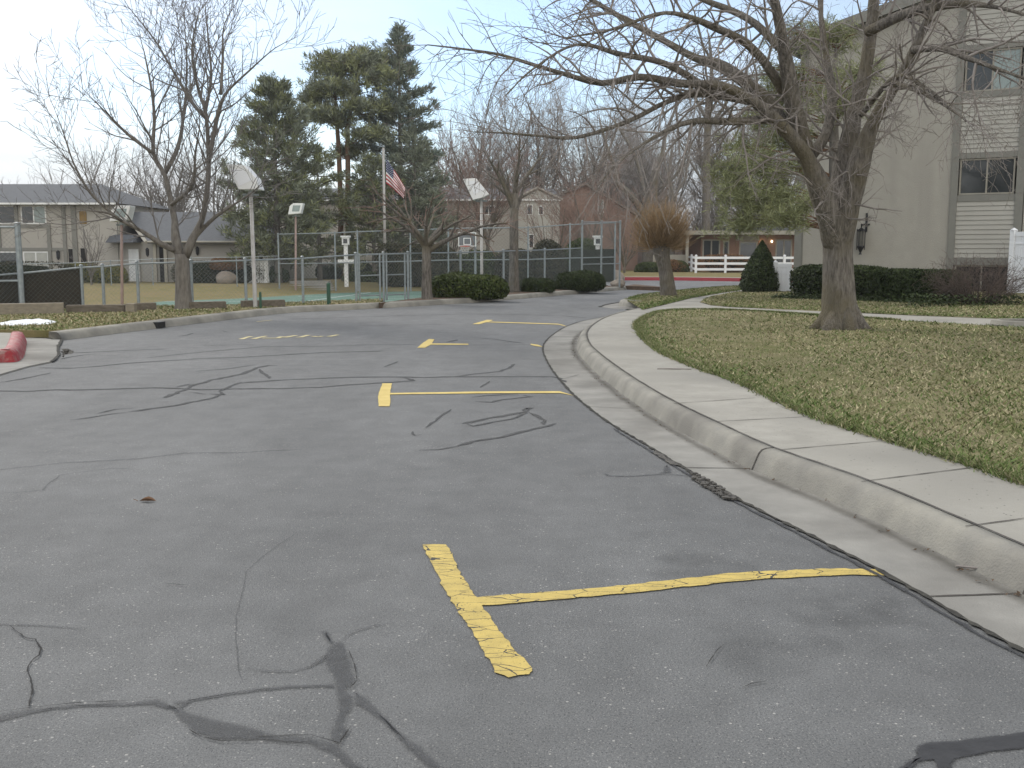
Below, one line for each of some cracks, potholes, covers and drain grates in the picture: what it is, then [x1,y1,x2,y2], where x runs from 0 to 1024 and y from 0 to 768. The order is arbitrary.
crack [4,626,357,743]
crack [4,302,1024,666]
